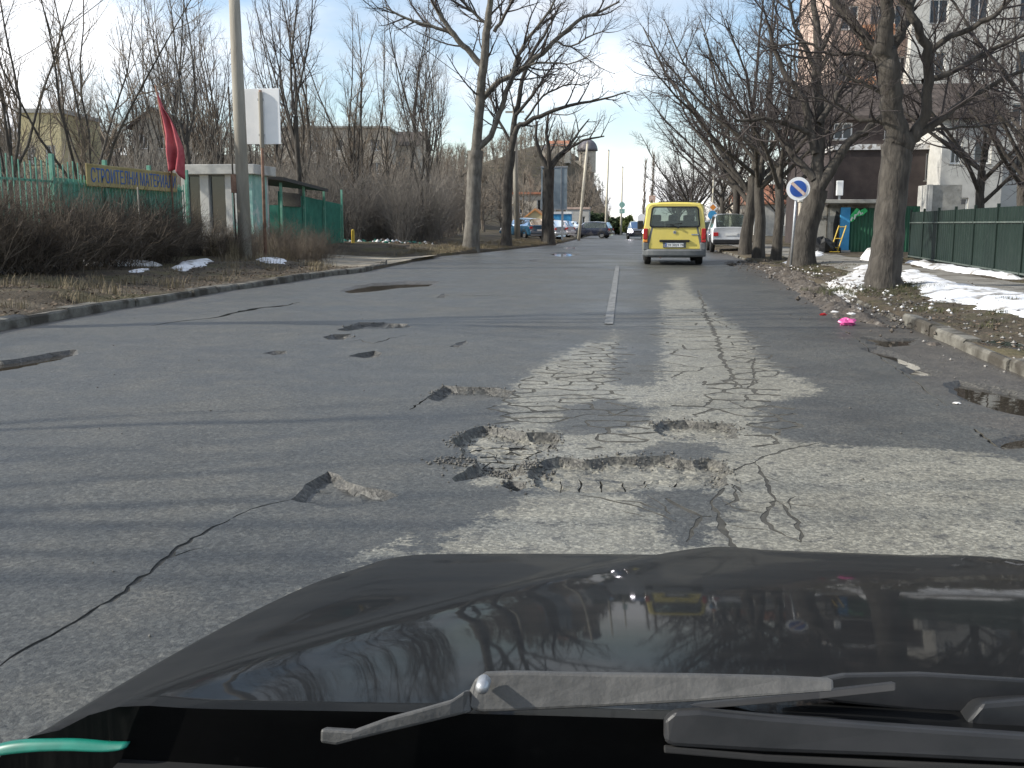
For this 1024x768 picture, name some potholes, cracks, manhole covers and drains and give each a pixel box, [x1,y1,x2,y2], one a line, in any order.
pothole [653,420,739,440]
pothole [528,455,732,493]
pothole [502,480,526,492]
pothole [291,471,398,508]
crack [487,342,656,450]
pothole [340,281,439,292]
pothole [338,322,411,331]
pothole [0,349,78,365]
crack [469,445,552,480]
crack [152,302,300,326]
crack [974,429,998,447]
pothole [426,385,514,402]
